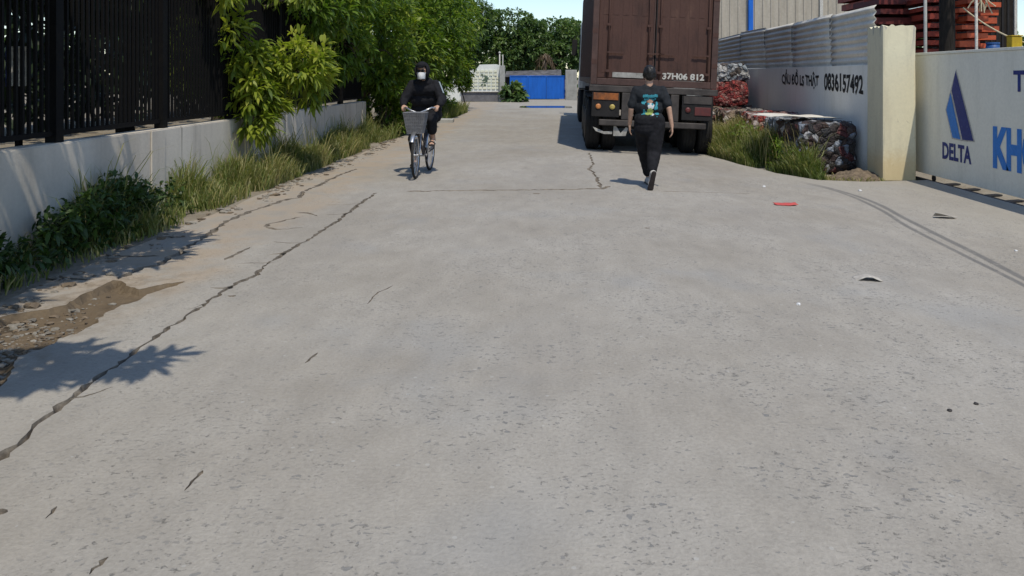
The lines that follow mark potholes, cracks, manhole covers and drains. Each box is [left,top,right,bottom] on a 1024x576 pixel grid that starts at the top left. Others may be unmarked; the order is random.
crack [0,169,376,490]
crack [408,153,747,194]
